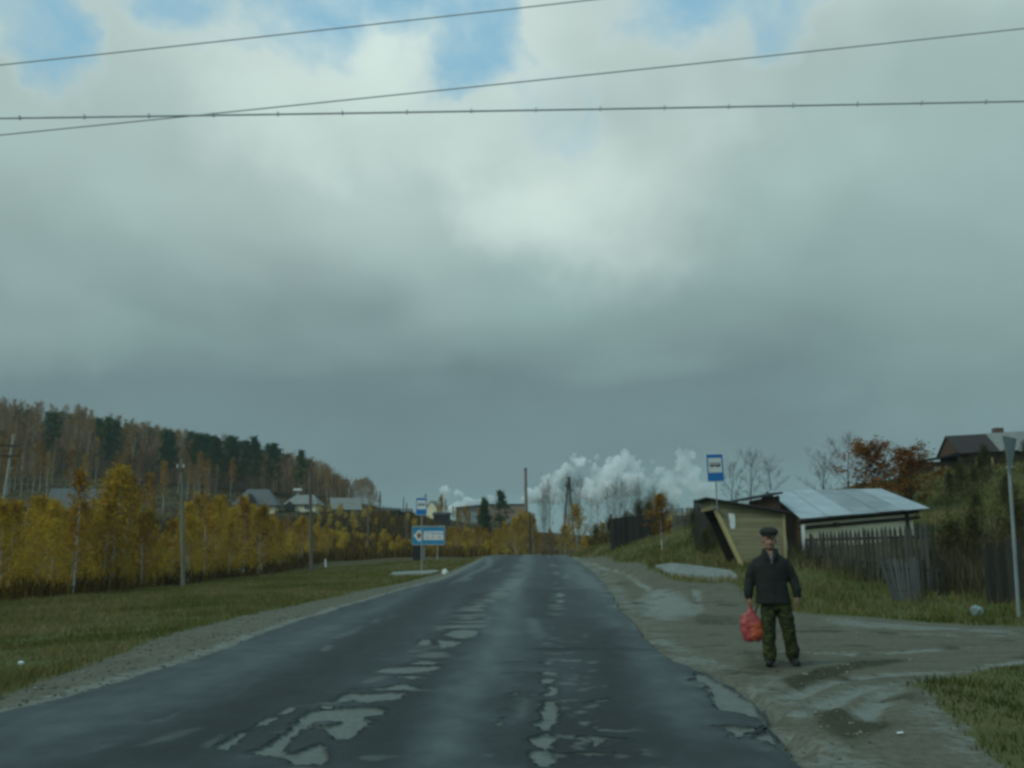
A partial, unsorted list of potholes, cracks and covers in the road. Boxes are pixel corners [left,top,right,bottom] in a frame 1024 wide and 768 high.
pothole [231,705,399,768]
pothole [523,676,573,686]
pothole [563,733,638,749]
pothole [425,628,495,640]
pothole [517,698,578,733]
pothole [511,748,568,768]
crack [727,721,783,745]
pothole [512,731,573,751]
pothole [197,728,266,753]
pothole [423,638,479,650]
pothole [399,638,435,648]
